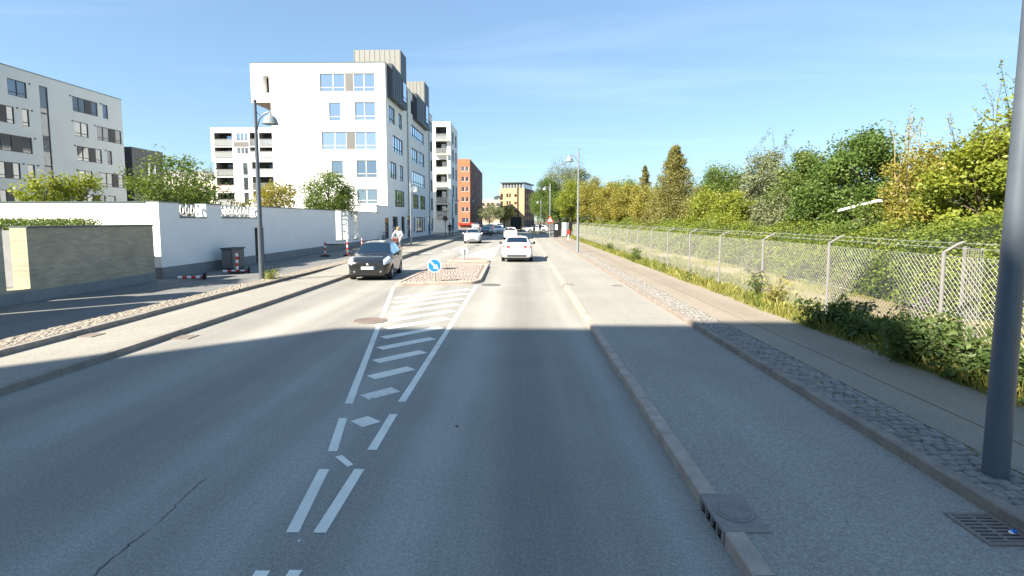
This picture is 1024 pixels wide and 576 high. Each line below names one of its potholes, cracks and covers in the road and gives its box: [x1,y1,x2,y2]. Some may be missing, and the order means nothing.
drain grate [943,512,1024,547]
crack [93,477,208,576]
